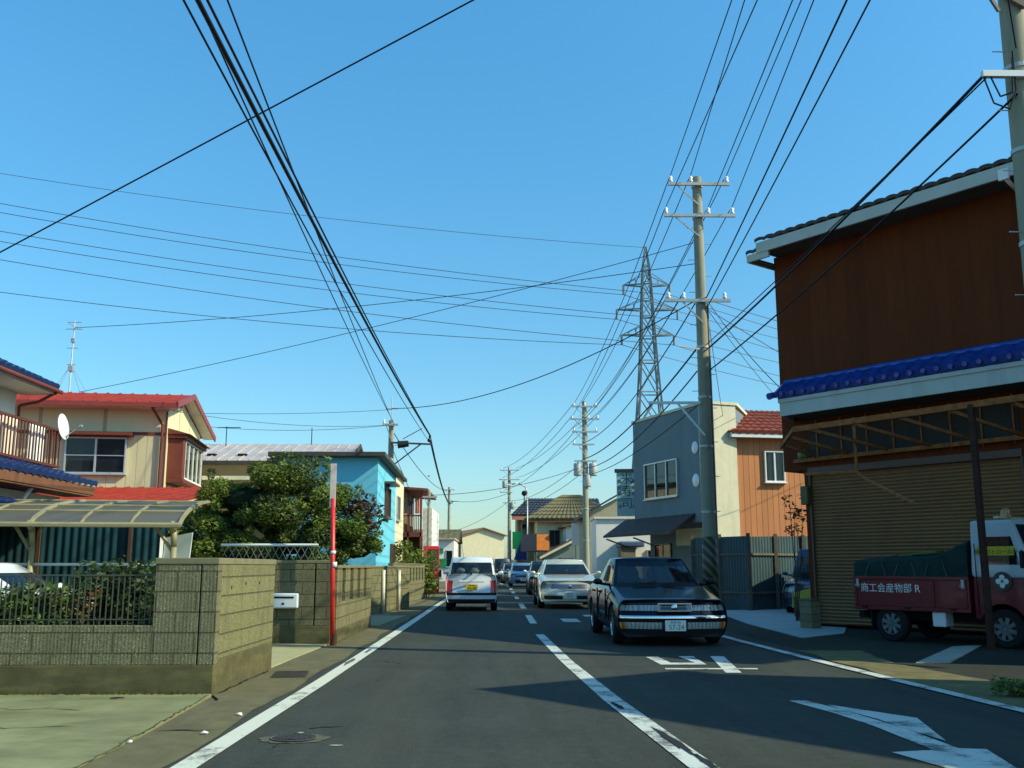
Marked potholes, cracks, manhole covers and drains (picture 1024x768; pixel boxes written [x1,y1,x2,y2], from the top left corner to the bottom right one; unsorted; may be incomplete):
manhole cover [258,733,331,744]
crack [0,707,73,728]
